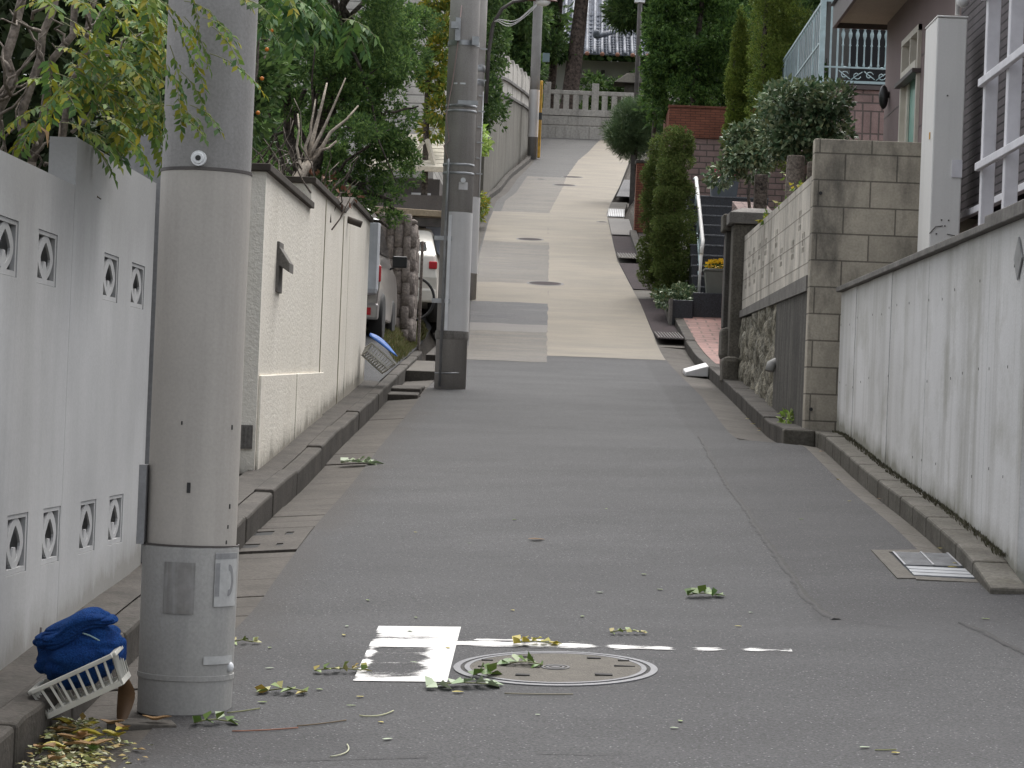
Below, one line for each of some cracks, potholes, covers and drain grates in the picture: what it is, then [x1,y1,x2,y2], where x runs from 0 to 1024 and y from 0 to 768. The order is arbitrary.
crack [698,437,1024,655]
manhole cover [453,651,658,687]
drain grate [871,549,979,583]
